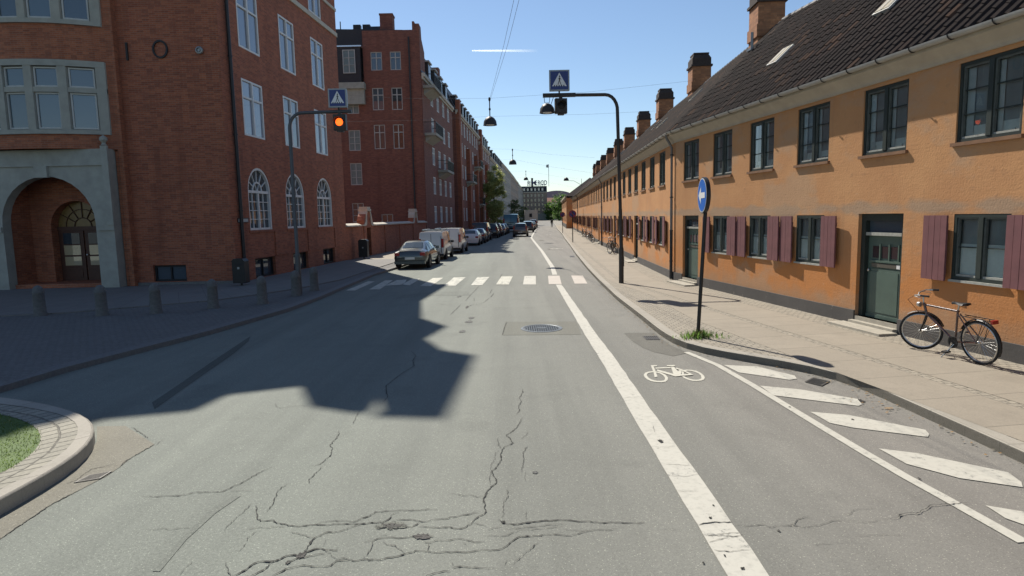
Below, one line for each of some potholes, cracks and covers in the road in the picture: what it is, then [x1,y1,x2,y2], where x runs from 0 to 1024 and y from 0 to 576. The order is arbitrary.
pothole [375,521,406,530]
manhole cover [521,324,562,332]
drain grate [74,471,112,483]
crack [143,390,641,576]
crack [699,502,967,552]
drain grate [805,377,830,386]
